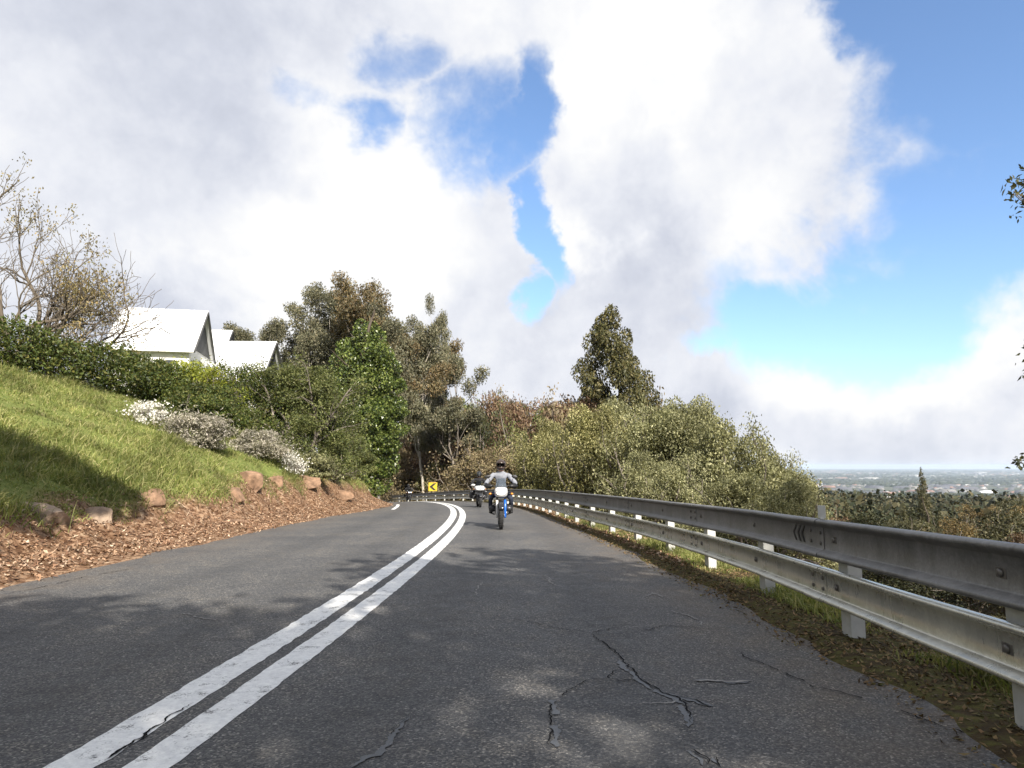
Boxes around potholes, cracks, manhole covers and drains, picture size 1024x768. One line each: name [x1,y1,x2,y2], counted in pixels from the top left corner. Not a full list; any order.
crack [108,704,189,758]
crack [493,611,948,749]
crack [687,748,722,767]
